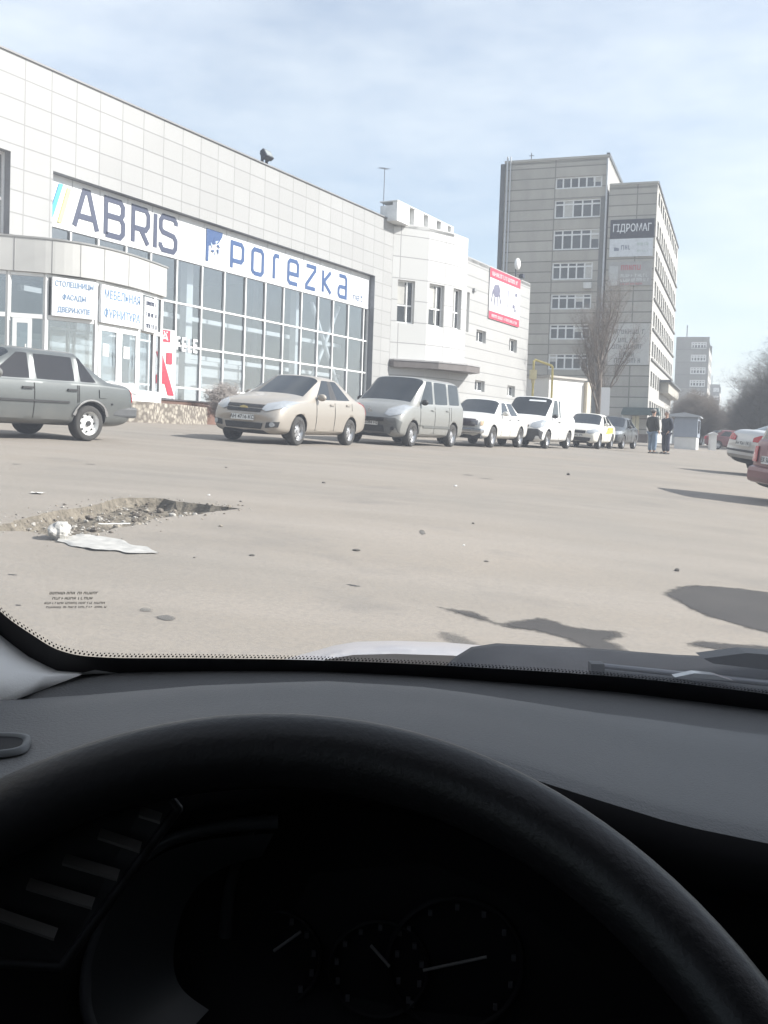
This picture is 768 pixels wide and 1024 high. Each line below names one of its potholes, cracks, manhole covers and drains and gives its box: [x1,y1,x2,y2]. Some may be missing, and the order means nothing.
pothole [0,495,252,546]
